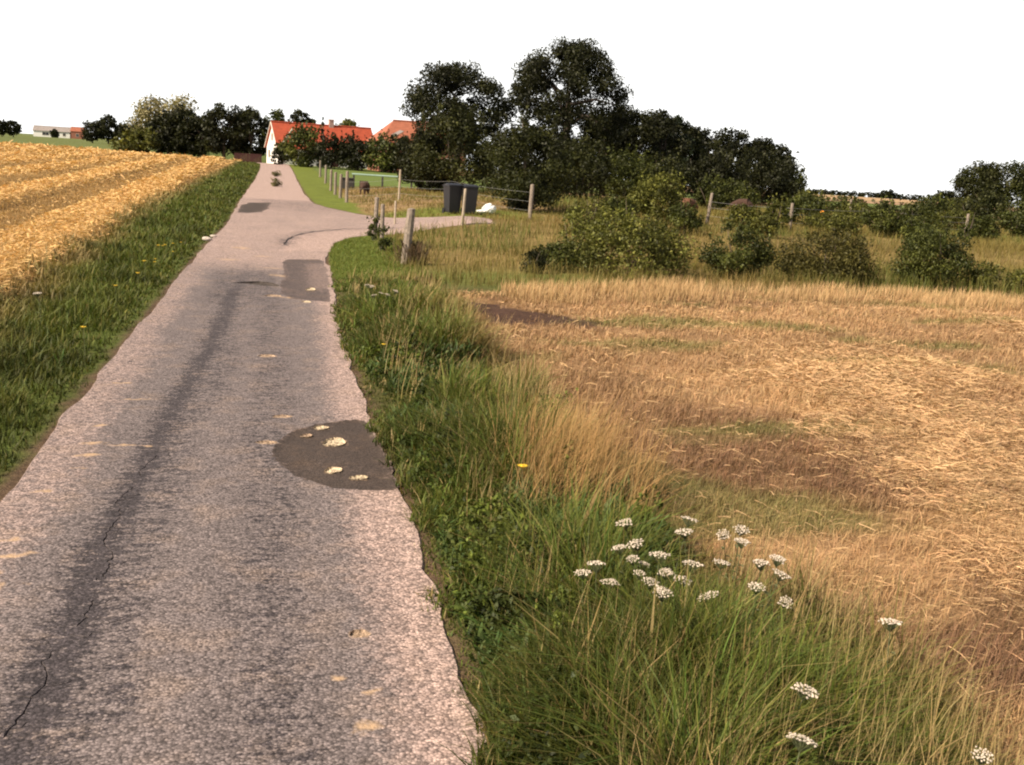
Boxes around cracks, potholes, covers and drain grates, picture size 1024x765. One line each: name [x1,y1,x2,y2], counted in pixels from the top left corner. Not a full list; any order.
crack [0,455,161,738]
